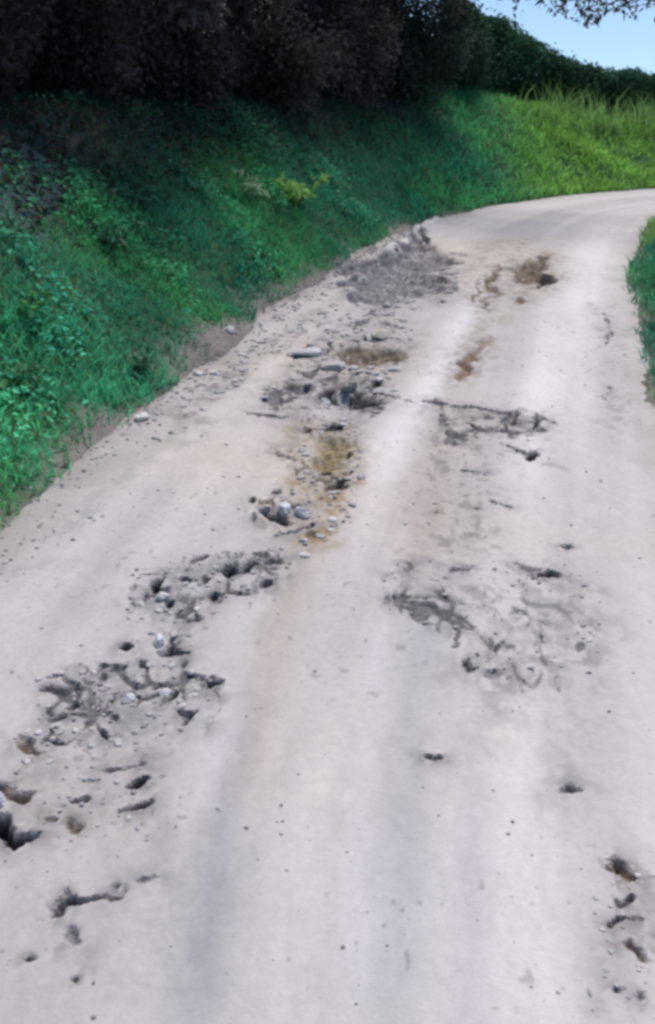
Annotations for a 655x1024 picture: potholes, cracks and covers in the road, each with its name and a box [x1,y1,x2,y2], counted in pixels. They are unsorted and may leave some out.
pothole [253,552,290,566]
pothole [113,798,155,814]
pothole [619,937,653,967]
pothole [571,641,587,653]
pothole [94,723,117,742]
pothole [44,712,68,724]
pothole [329,345,414,368]
pothole [423,752,446,761]
pothole [174,708,200,727]
pothole [304,529,320,540]
pothole [217,558,261,579]
